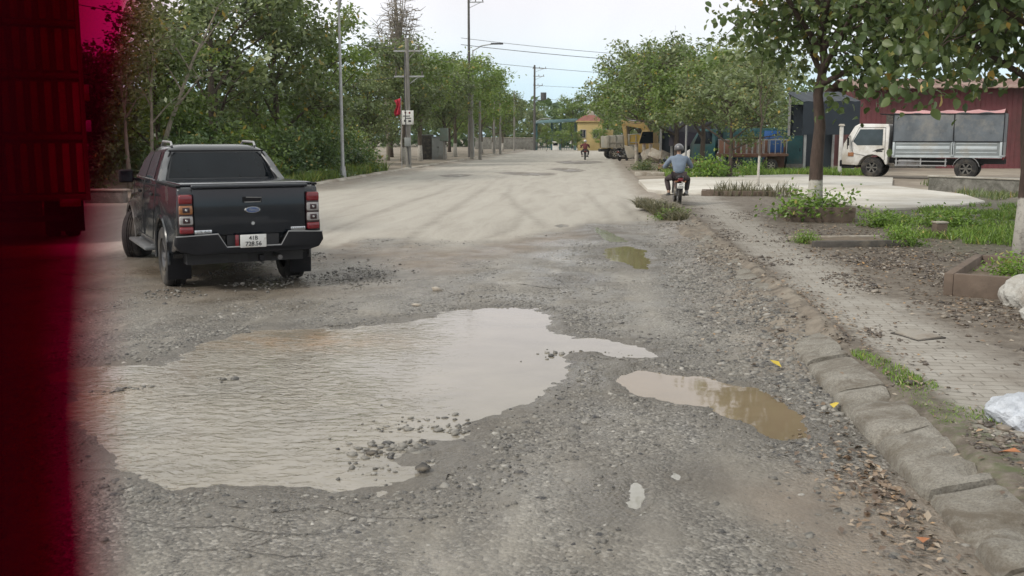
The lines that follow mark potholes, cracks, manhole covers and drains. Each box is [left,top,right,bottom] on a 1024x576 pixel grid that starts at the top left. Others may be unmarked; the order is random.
pothole [595,243,660,271]
pothole [97,306,677,500]
pothole [597,361,828,445]
